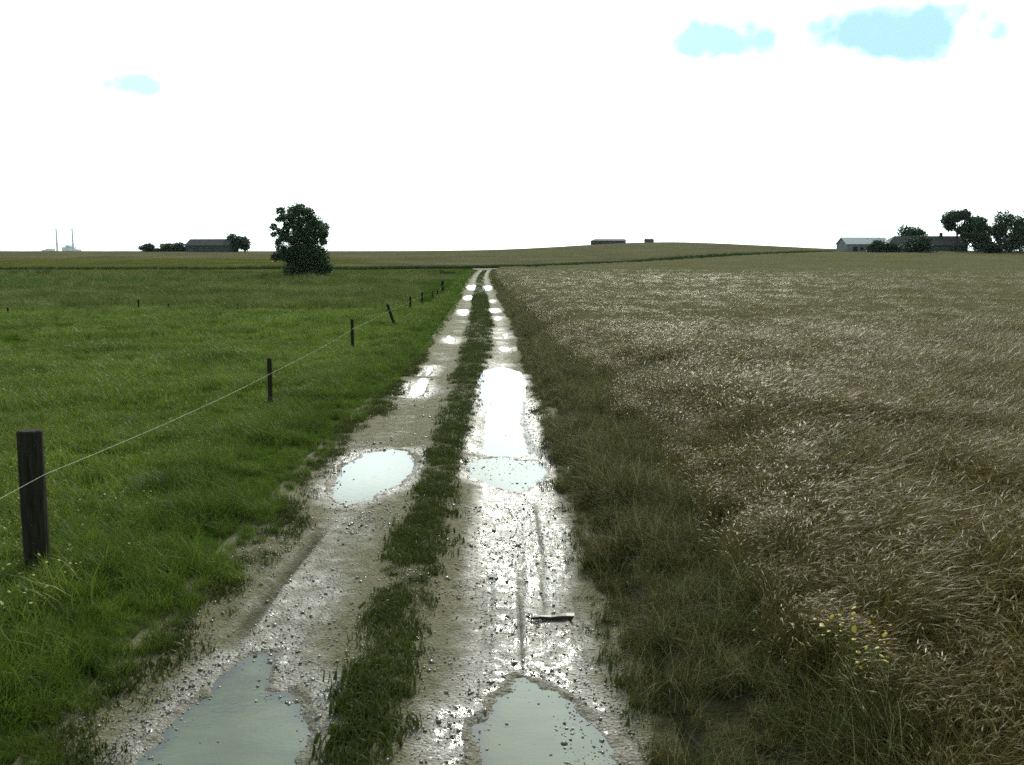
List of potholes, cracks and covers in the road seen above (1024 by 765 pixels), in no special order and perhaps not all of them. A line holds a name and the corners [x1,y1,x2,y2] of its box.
pothole [460,671,643,765]
pothole [459,456,554,494]
pothole [324,448,424,506]
pothole [118,648,330,765]
